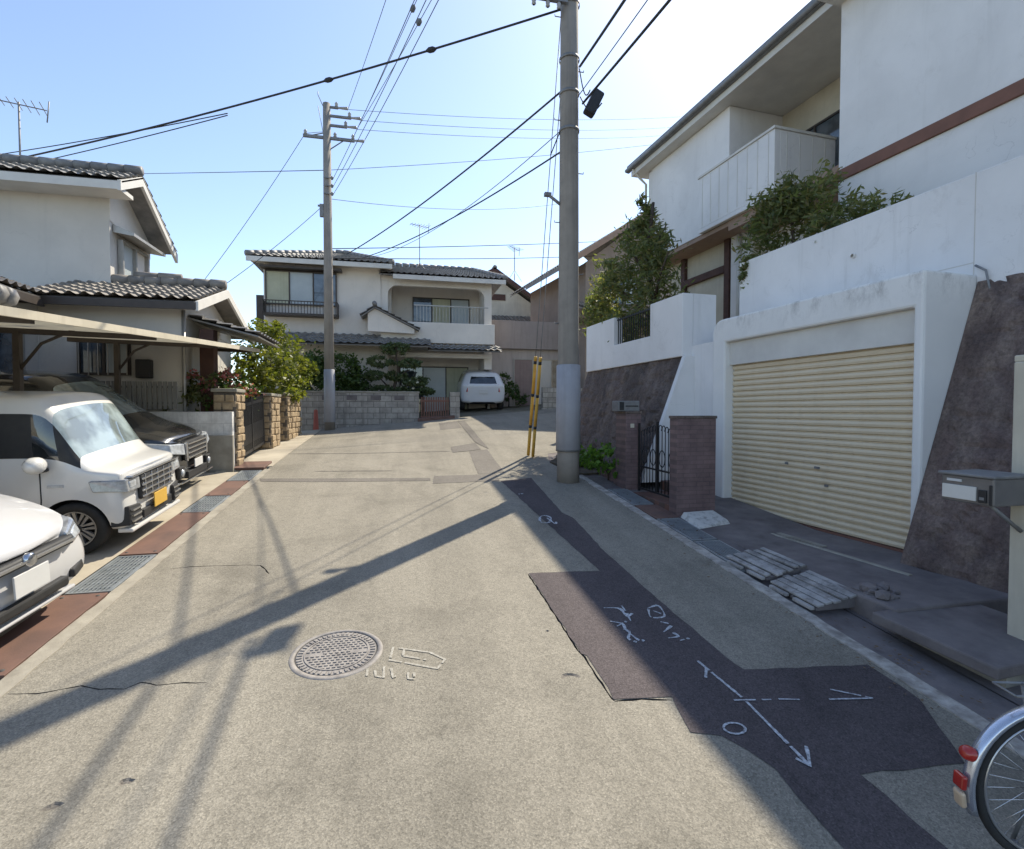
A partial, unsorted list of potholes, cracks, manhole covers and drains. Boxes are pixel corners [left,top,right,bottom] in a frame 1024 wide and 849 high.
drain grate [227,470,262,482]
drain grate [181,495,231,513]
drain grate [64,554,157,595]
crack [21,682,207,694]
manhole cover [288,630,383,680]
